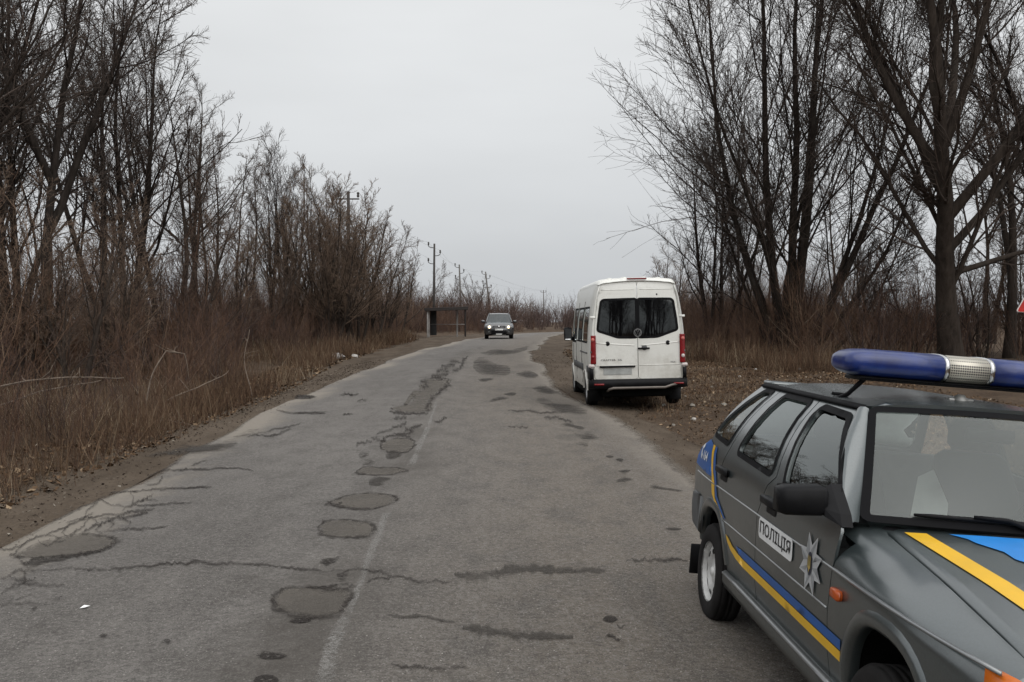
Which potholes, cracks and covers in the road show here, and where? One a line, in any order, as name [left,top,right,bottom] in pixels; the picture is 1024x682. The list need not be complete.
crack [0,465,318,607]
